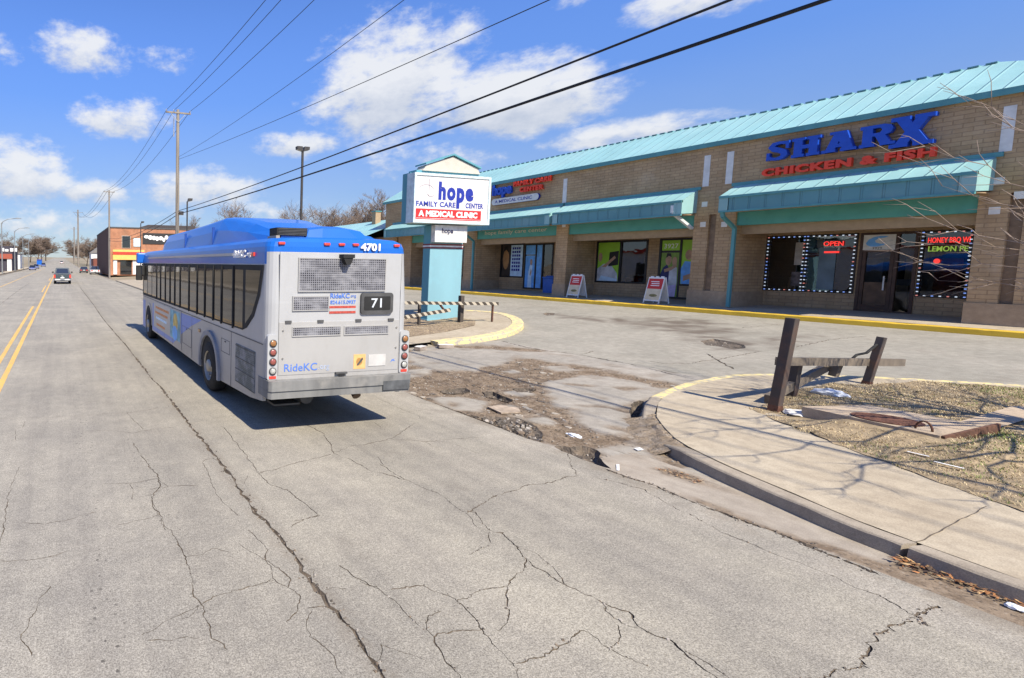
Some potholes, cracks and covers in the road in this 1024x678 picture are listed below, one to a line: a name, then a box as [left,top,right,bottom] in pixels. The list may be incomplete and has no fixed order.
pothole [630,400,644,418]
crack [307,425,729,678]
pothole [555,445,611,469]
crack [333,394,475,464]
crack [104,411,426,672]
pothole [469,414,543,442]
pothole [483,391,513,403]
crack [609,480,940,678]
crack [658,336,864,369]
